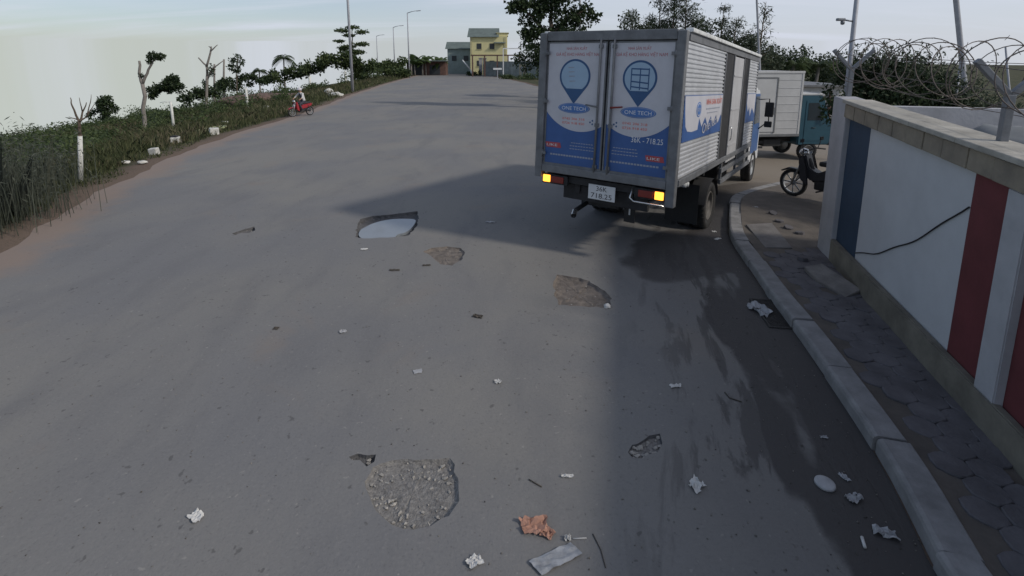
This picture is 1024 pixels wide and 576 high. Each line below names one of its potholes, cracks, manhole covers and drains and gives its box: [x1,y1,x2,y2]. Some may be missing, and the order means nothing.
pothole [628,434,662,458]
pothole [365,458,459,530]
pothole [355,211,419,238]
drain grate [749,298,793,330]
